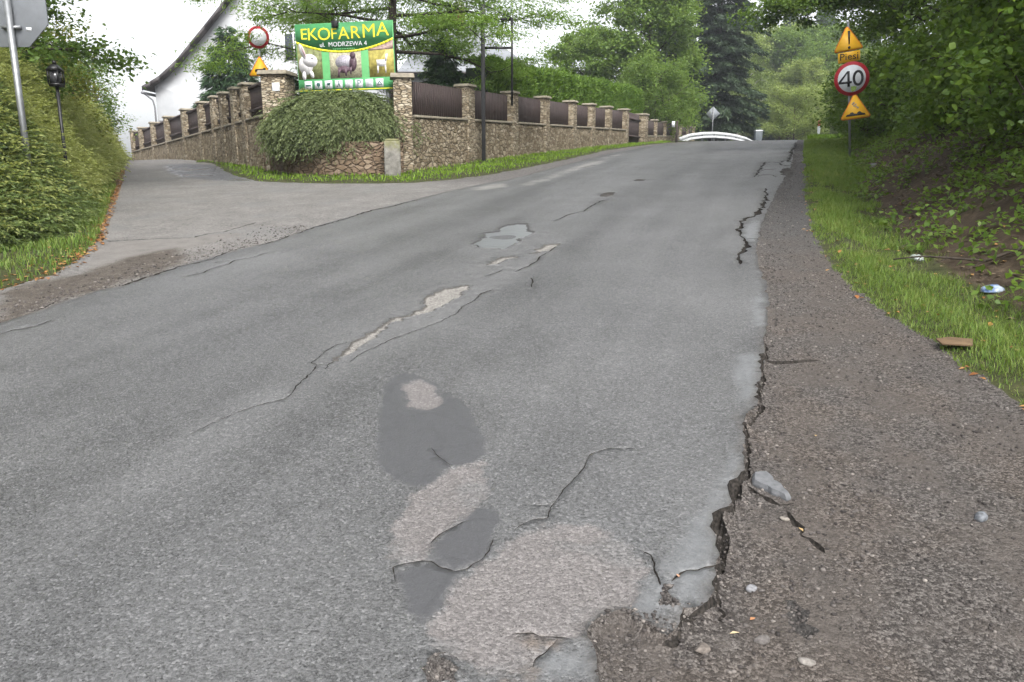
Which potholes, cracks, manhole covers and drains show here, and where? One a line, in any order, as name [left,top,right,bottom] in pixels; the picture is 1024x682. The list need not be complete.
crack [515,448,609,529]
crack [203,246,556,428]
crack [643,343,825,648]
pothole [470,223,535,249]
crack [735,142,797,264]
